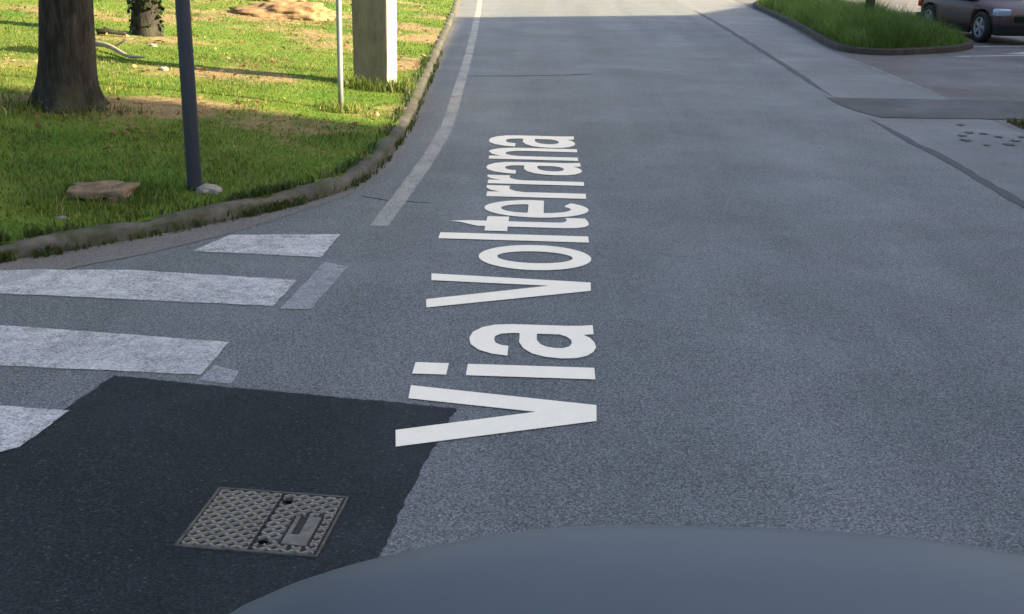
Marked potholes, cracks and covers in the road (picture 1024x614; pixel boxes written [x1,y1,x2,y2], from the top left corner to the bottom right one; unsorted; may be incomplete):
manhole cover [174,487,349,558]
